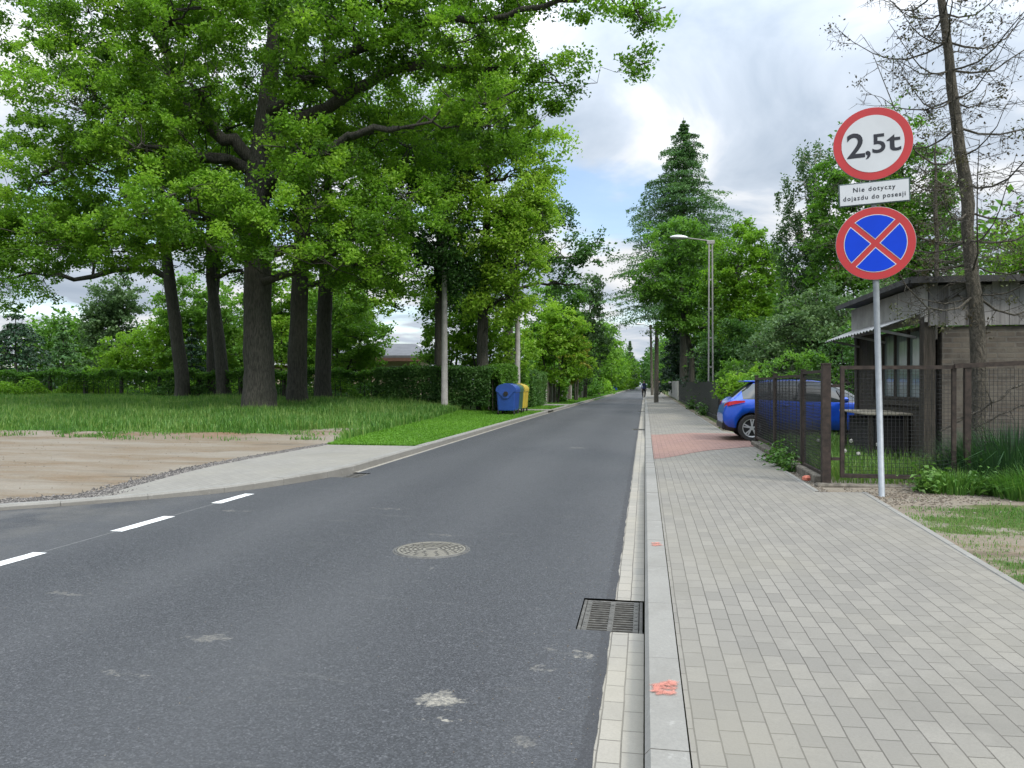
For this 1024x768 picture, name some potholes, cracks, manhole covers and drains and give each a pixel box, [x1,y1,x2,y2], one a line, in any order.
drain grate [577,600,643,634]
manhole cover [392,541,470,559]
